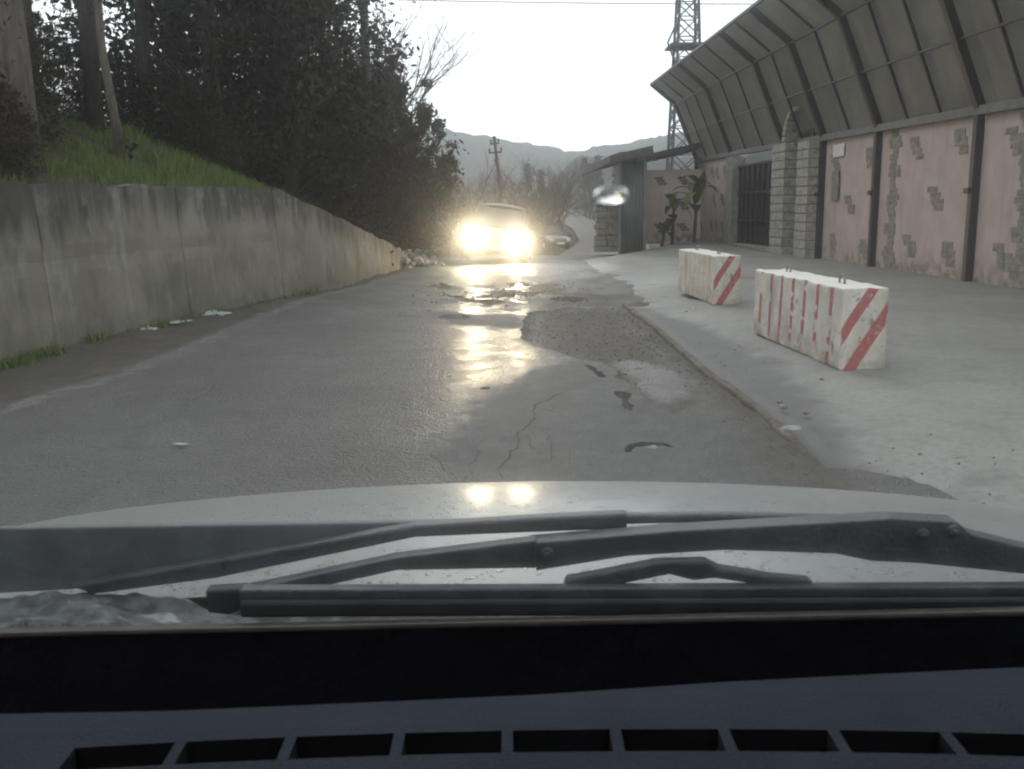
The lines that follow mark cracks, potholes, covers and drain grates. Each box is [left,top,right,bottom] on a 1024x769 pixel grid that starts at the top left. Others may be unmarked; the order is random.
pothole [439,291,505,306]
crack [427,388,575,483]
pothole [624,442,676,453]
pothole [519,306,718,415]
pothole [479,289,546,298]
